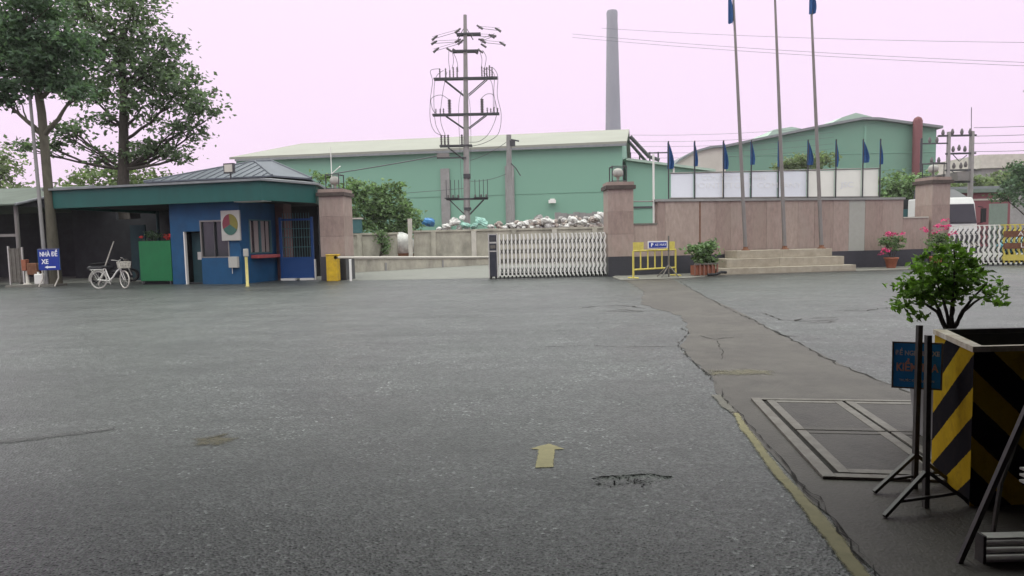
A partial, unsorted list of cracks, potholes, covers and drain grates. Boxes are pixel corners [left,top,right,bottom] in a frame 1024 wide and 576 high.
crack [536,328,877,576]
manhole cover [751,398,948,483]
crack [680,281,908,392]
pothole [592,473,677,489]
